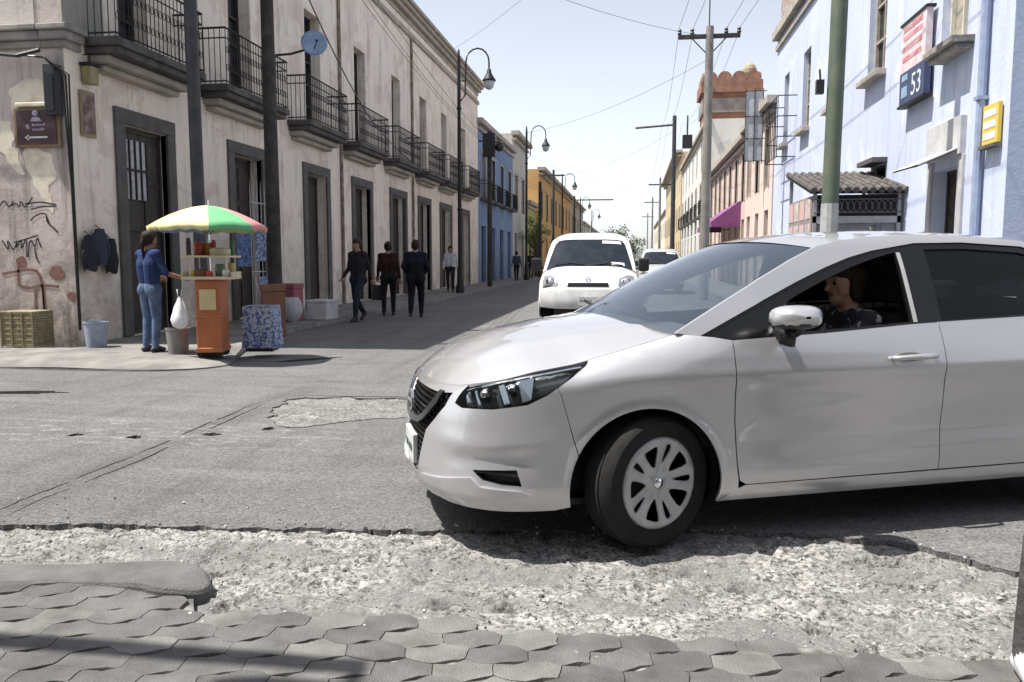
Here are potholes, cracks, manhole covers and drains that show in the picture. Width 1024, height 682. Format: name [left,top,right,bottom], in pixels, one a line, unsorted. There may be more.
crack [0,402,260,515]
pothole [0,523,1019,662]
